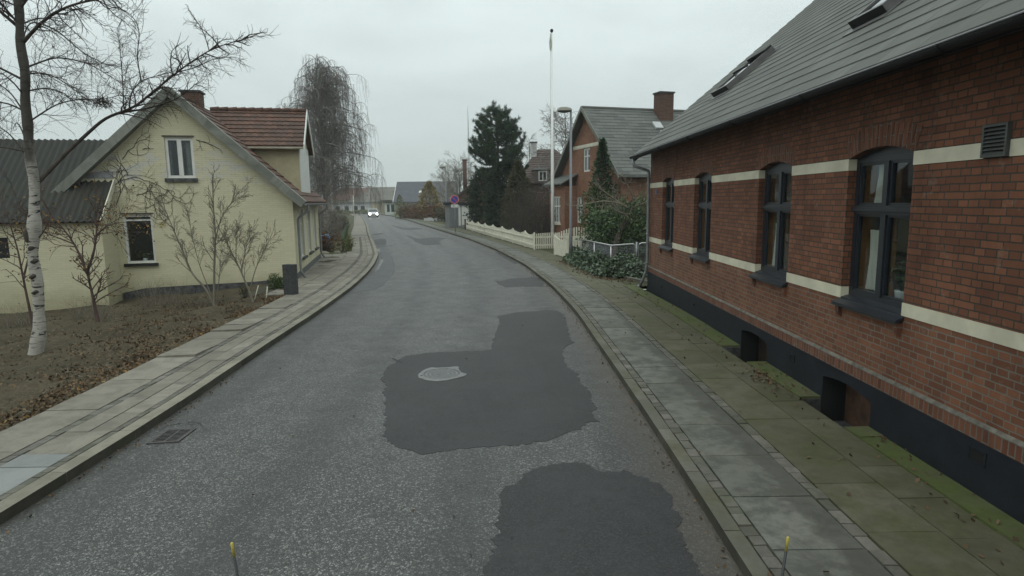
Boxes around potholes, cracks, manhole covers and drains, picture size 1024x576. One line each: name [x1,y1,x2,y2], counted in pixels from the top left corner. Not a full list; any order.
manhole cover [418,366,467,382]
drain grate [146,428,196,444]
